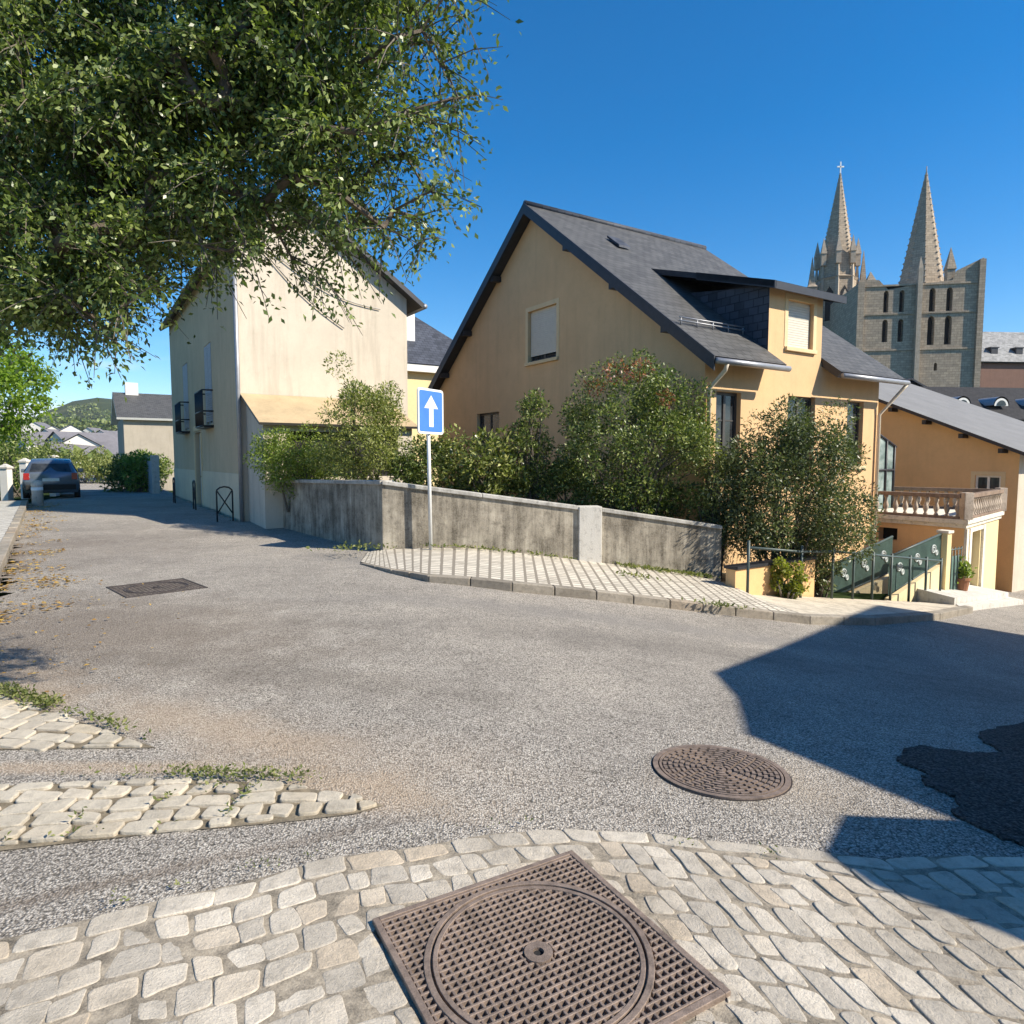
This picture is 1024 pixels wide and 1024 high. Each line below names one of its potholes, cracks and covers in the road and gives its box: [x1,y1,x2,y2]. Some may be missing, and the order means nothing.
manhole cover [372,850,731,1024]
manhole cover [651,744,793,801]
manhole cover [106,578,208,598]
